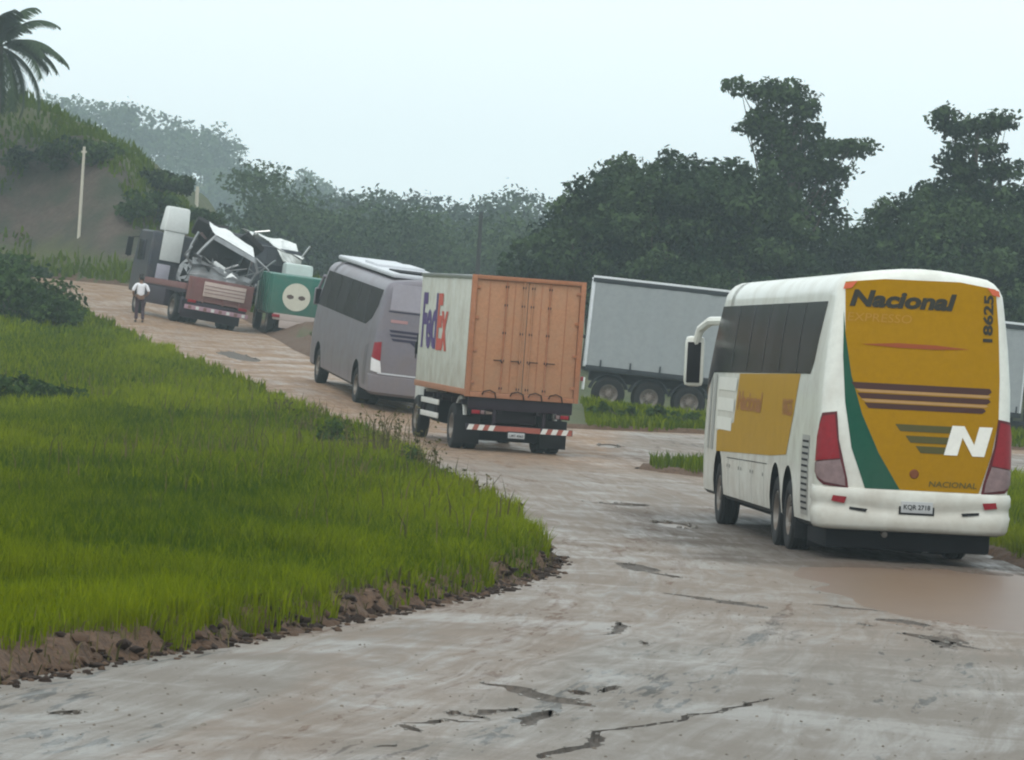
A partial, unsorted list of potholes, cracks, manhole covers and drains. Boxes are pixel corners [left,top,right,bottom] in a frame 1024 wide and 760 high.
crack [378,681,773,759]
pothole [614,562,683,578]
pothole [649,519,698,529]
crack [665,593,768,609]
